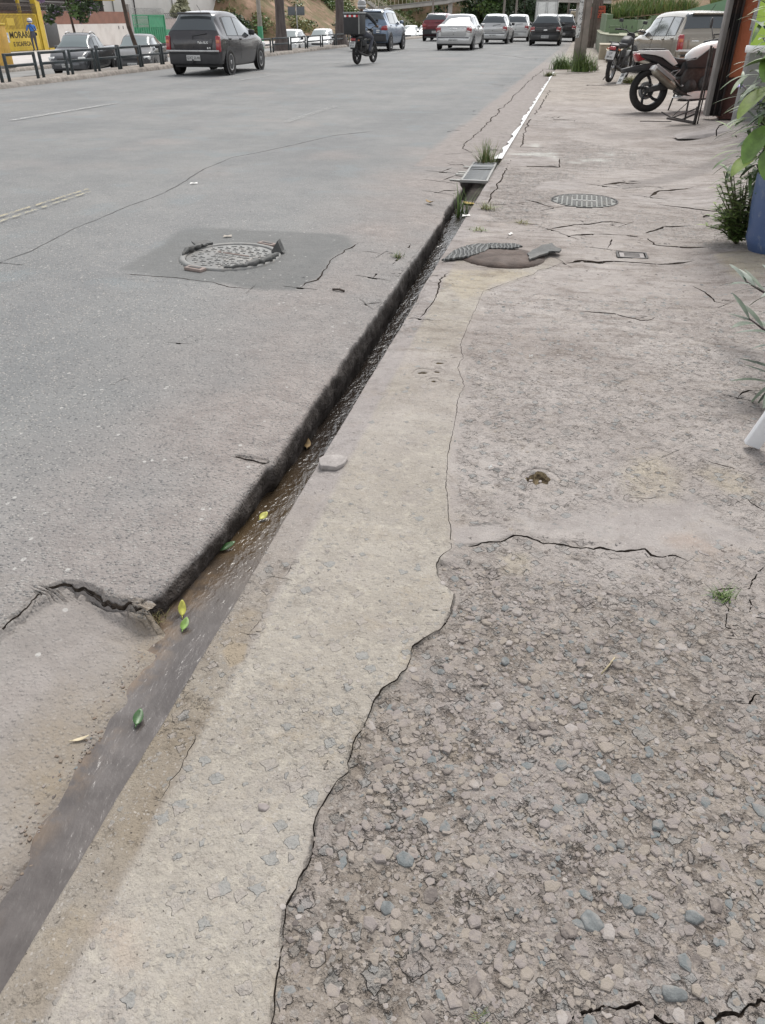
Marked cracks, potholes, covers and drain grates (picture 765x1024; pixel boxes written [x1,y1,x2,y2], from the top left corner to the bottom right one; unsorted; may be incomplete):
manhole cover [551,194,618,209]
manhole cover [179,239,286,273]
crack [425,54,631,184]
crack [234,179,765,1024]
drain grate [450,162,497,184]
pothole [412,369,433,378]
utility cover [616,251,648,259]
crack [1,583,156,636]
pothole [520,469,560,490]
manhole cover [442,243,561,269]
